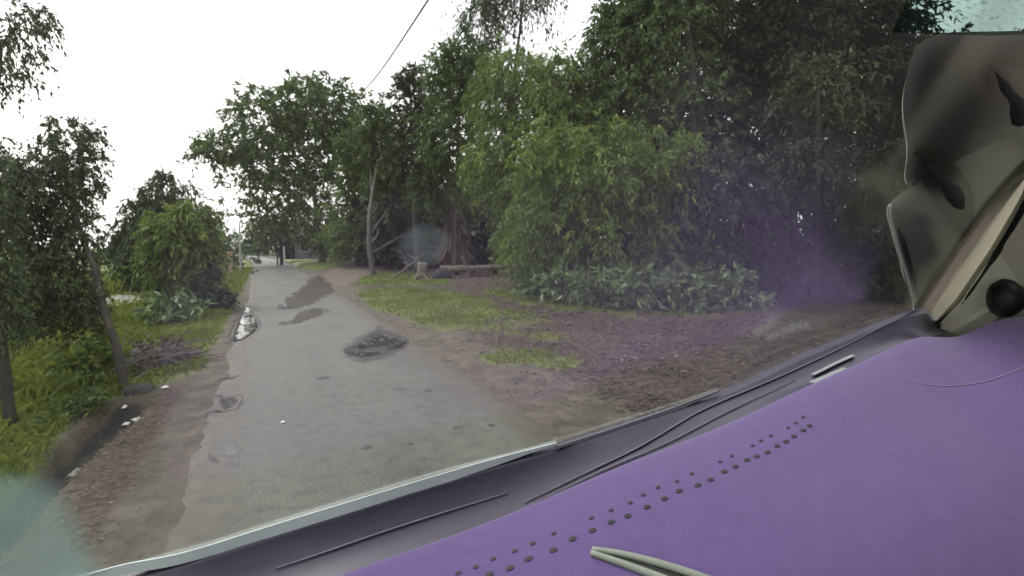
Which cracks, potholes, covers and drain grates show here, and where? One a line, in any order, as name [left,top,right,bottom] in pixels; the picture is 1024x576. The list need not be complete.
pothole [345,331,409,357]
pothole [220,395,243,410]
pothole [232,306,262,341]
